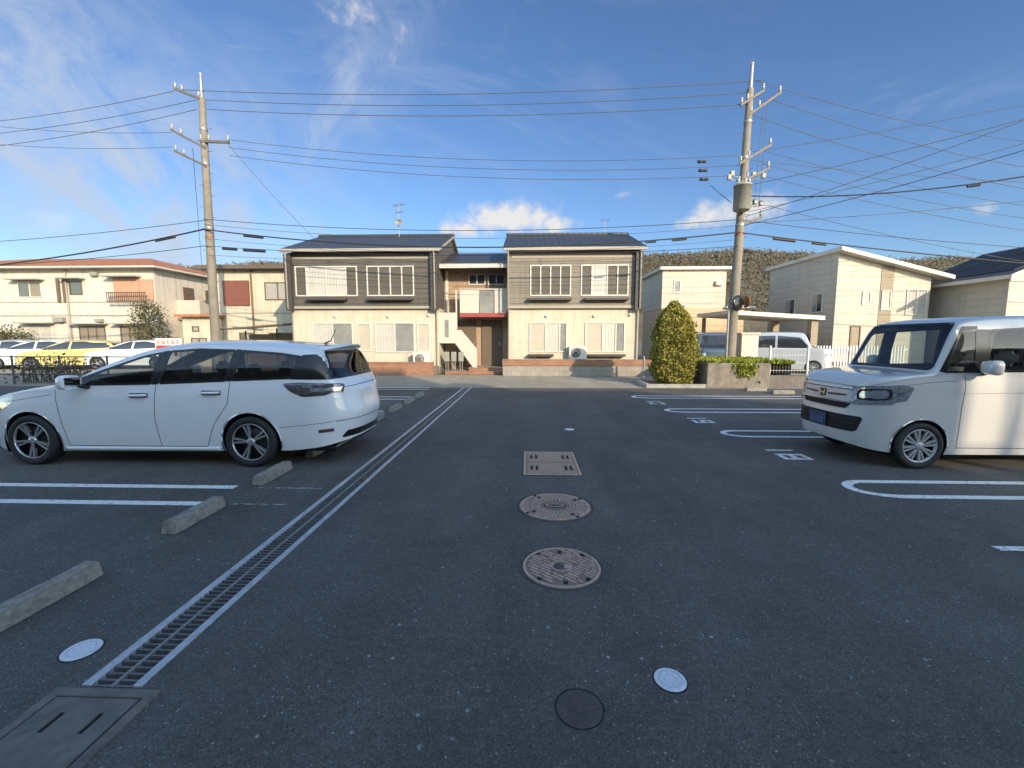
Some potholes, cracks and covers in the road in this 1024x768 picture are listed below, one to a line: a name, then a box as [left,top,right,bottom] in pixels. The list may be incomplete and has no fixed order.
drain grate [230,512,334,571]
drain grate [82,570,269,688]
drain grate [378,437,417,454]
manhole cover [555,688,605,730]
utility cover [57,638,105,663]
utility cover [652,667,689,694]
manhole cover [520,547,604,591]
manhole cover [522,451,583,476]
drain grate [304,477,373,513]
drain grate [349,454,398,478]
manhole cover [517,492,594,522]
